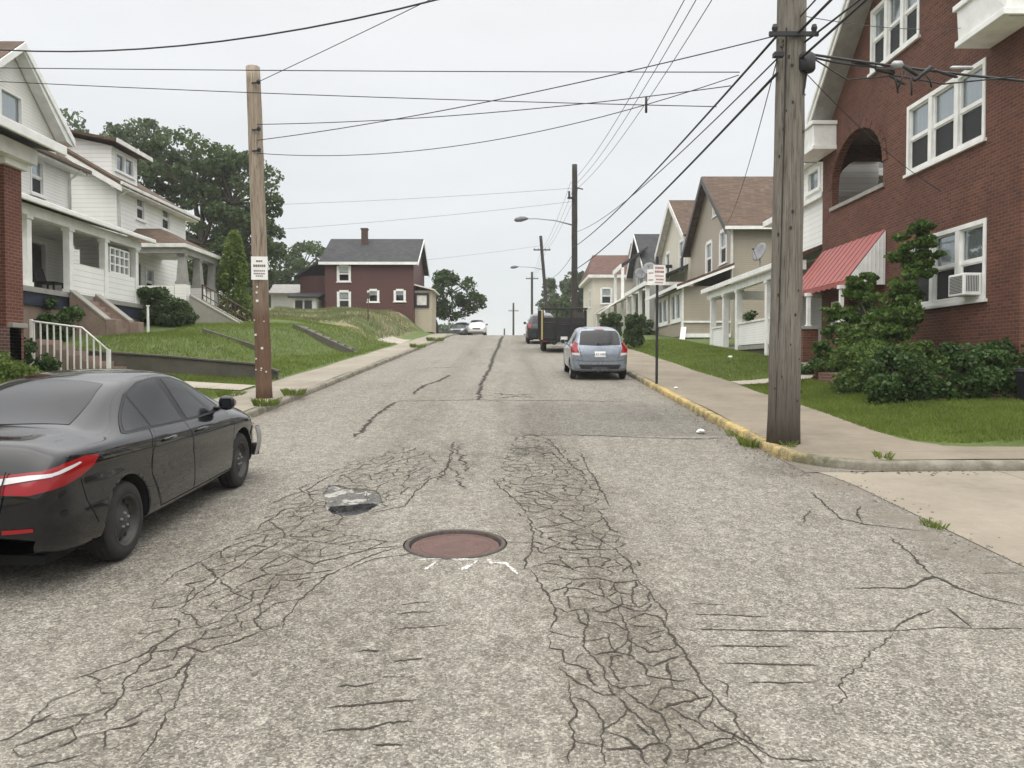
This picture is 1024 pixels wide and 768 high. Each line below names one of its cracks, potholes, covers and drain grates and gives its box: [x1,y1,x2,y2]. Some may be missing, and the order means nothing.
crack [490,432,1024,764]
crack [353,336,627,437]
pothole [323,485,383,516]
manhole cover [403,529,507,560]
crack [2,441,470,768]
